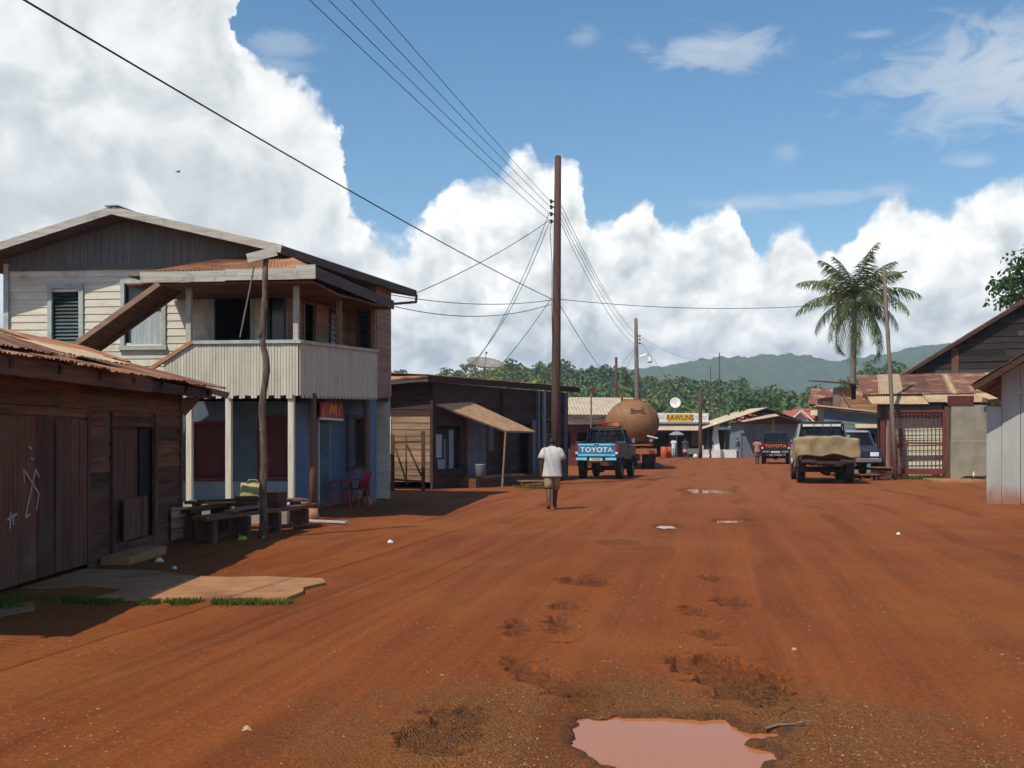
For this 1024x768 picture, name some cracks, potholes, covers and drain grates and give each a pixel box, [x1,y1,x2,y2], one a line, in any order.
pothole [530,612,588,643]
pothole [487,614,549,642]
pothole [353,702,516,768]
pothole [542,573,629,590]
pothole [658,487,752,495]
pothole [542,707,809,768]
pothole [641,648,828,716]
pothole [533,600,594,615]
pothole [639,523,697,532]
